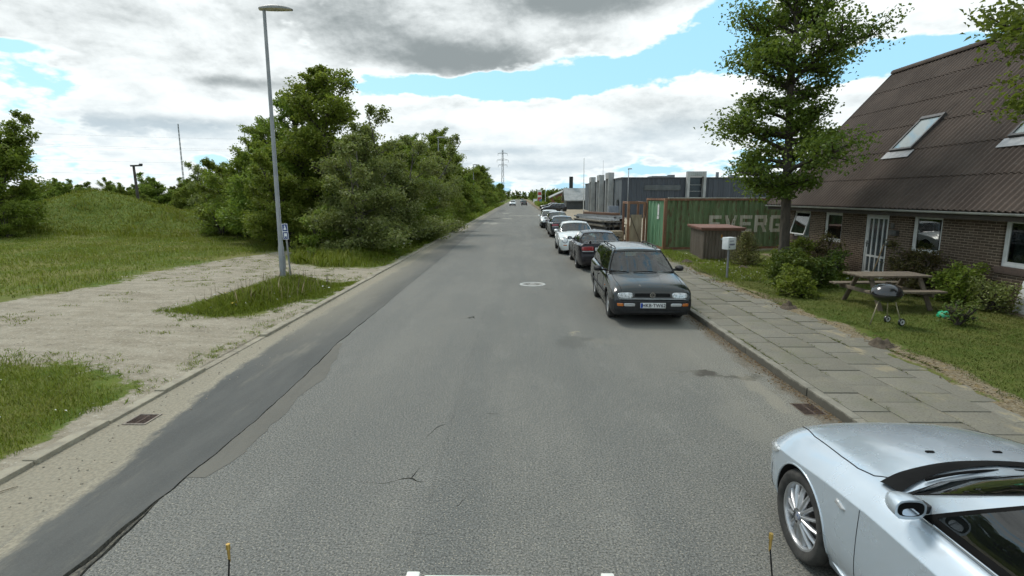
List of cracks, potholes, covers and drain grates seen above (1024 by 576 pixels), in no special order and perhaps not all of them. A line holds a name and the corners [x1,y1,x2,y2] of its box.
drain grate [122,414,162,425]
drain grate [789,403,828,415]
